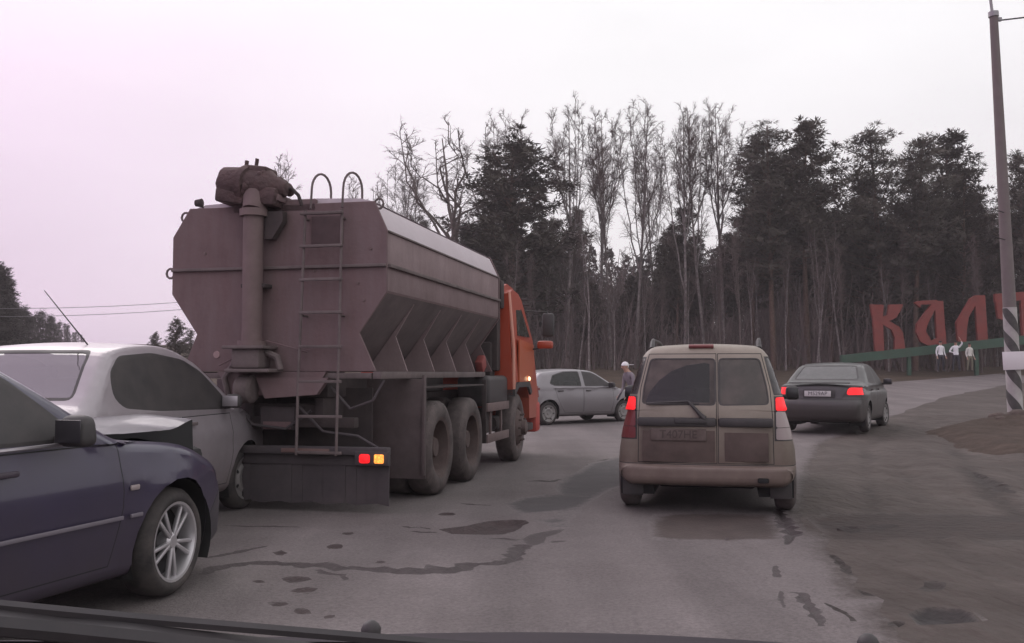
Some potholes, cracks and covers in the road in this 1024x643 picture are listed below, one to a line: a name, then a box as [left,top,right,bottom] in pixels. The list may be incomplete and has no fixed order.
pothole [439,520,529,535]
pothole [908,606,979,625]
